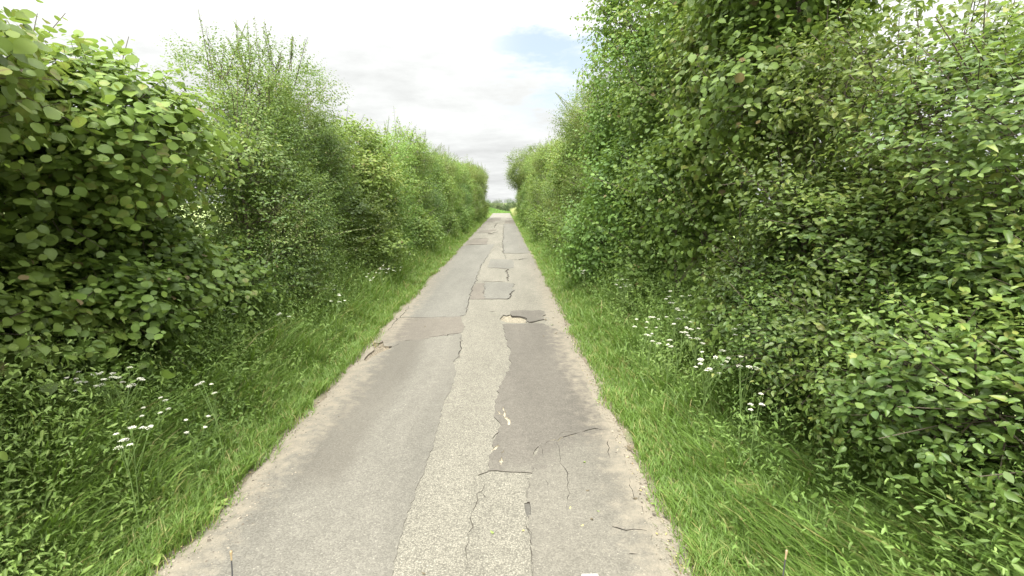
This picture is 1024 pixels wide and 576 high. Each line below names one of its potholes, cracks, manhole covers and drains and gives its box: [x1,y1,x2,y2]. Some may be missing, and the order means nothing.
crack [465,487,487,565]
crack [542,431,577,506]
crack [472,224,521,312]
pothole [500,314,527,323]
